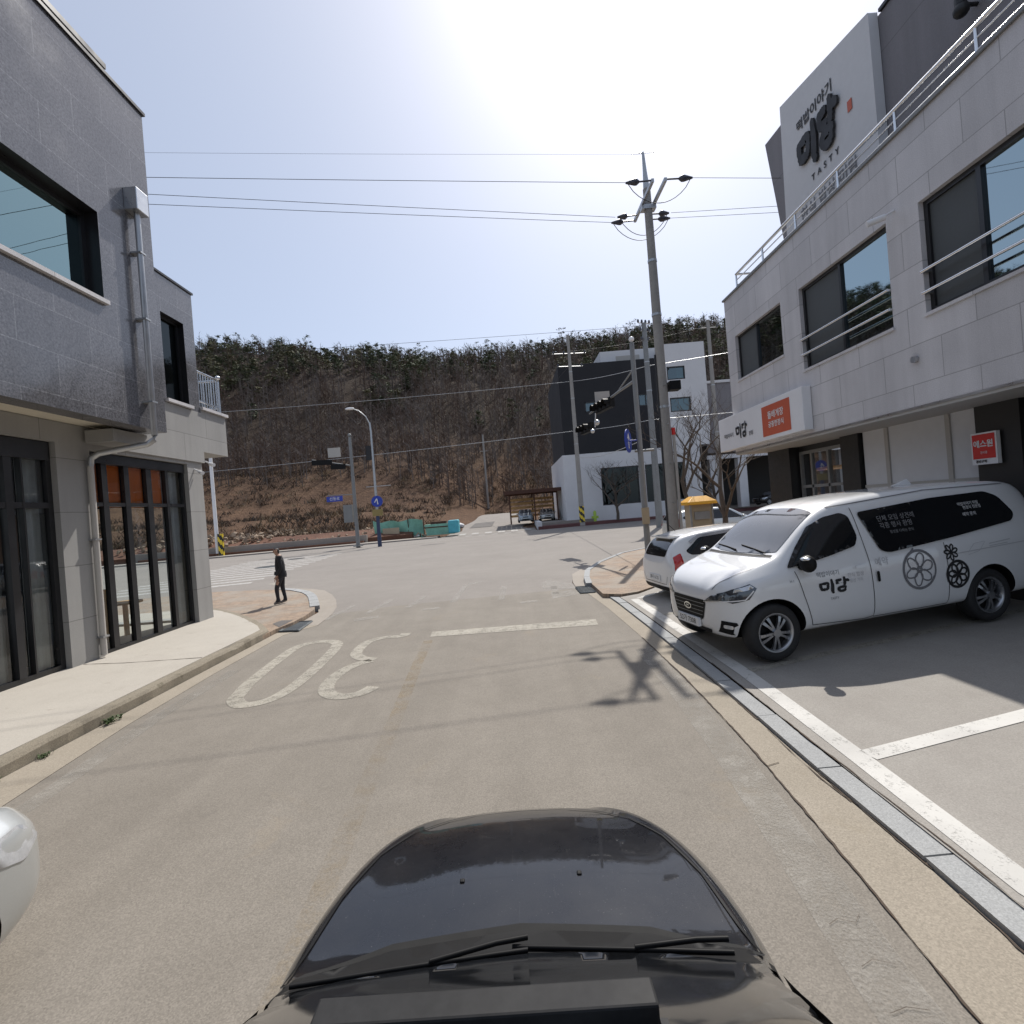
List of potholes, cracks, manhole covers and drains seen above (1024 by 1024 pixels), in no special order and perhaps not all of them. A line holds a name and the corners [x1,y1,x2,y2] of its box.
drain grate [278,620,313,633]
drain grate [575,586,595,594]
